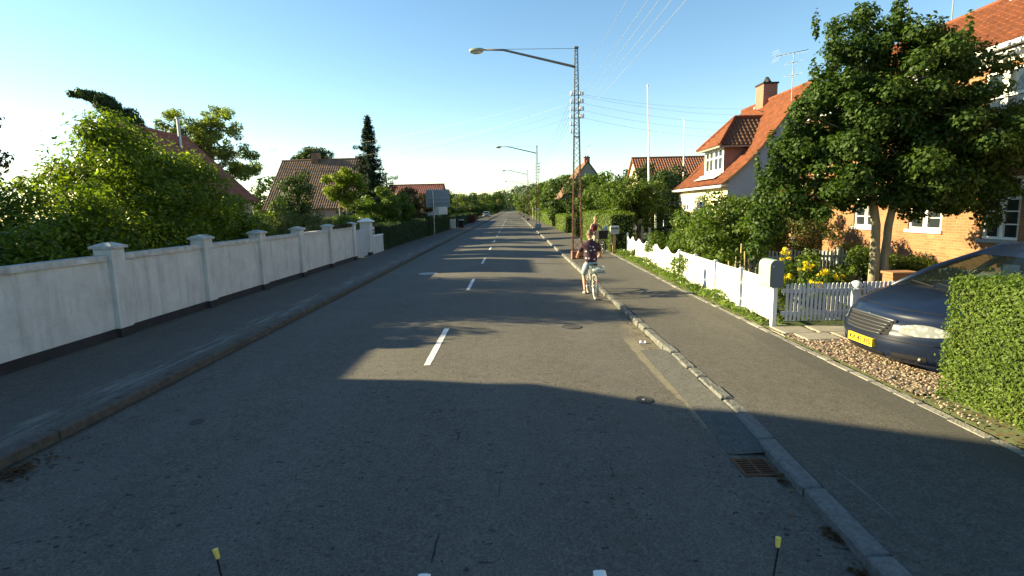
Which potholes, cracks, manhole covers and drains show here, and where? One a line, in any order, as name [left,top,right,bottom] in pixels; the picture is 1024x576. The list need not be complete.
manhole cover [635,396,653,404]
drain grate [730,457,781,477]
